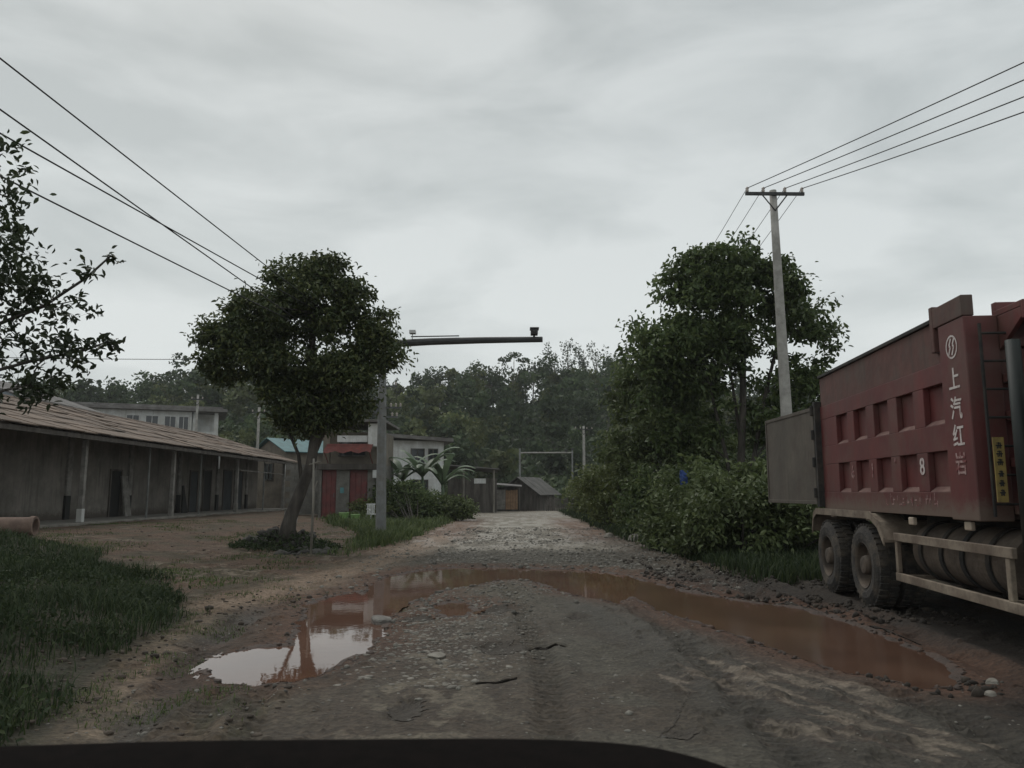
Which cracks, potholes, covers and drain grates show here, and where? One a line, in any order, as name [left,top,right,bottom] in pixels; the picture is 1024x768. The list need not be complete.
pothole [632,579,966,689]
pothole [362,566,643,614]
pothole [431,601,485,618]
pothole [190,590,394,687]
pothole [387,699,429,722]
crack [653,690,690,739]
